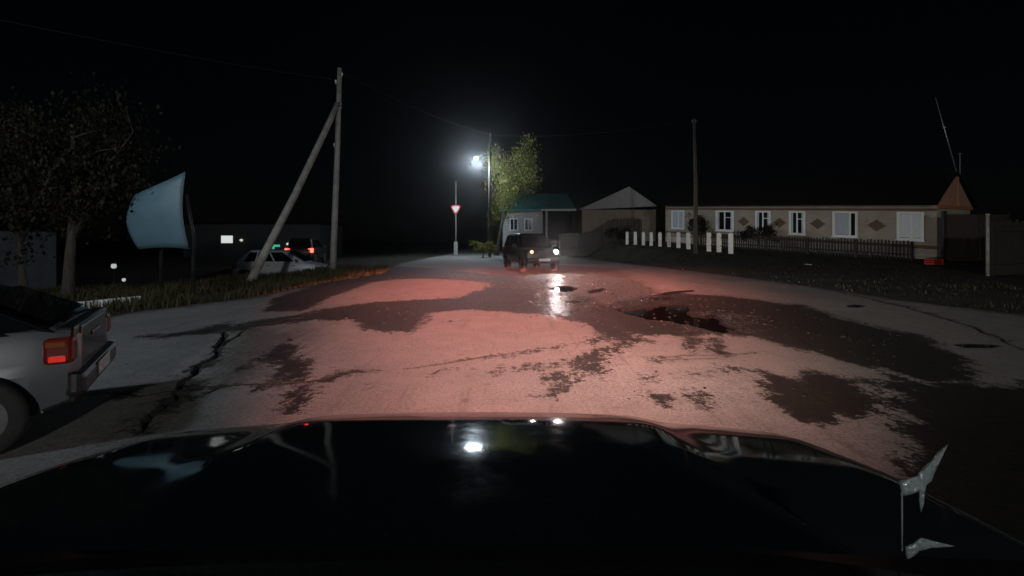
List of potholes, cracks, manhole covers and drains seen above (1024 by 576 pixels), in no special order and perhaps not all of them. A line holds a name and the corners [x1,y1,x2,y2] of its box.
crack [815,287,1024,350]
pothole [617,303,736,334]
crack [106,317,348,433]
